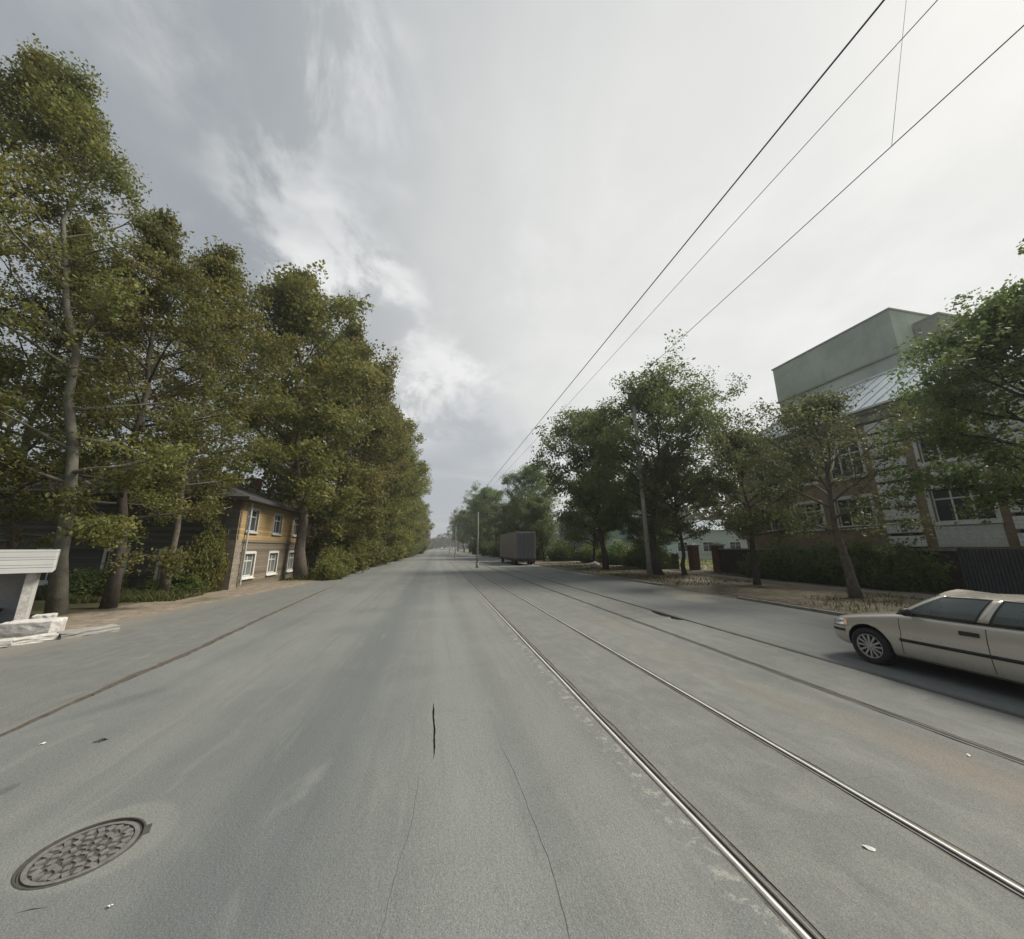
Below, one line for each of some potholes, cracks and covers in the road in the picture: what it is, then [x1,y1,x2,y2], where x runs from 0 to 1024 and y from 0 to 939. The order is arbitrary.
crack [377,784,418,939]
crack [501,747,570,939]
manhole cover [11,817,153,891]
